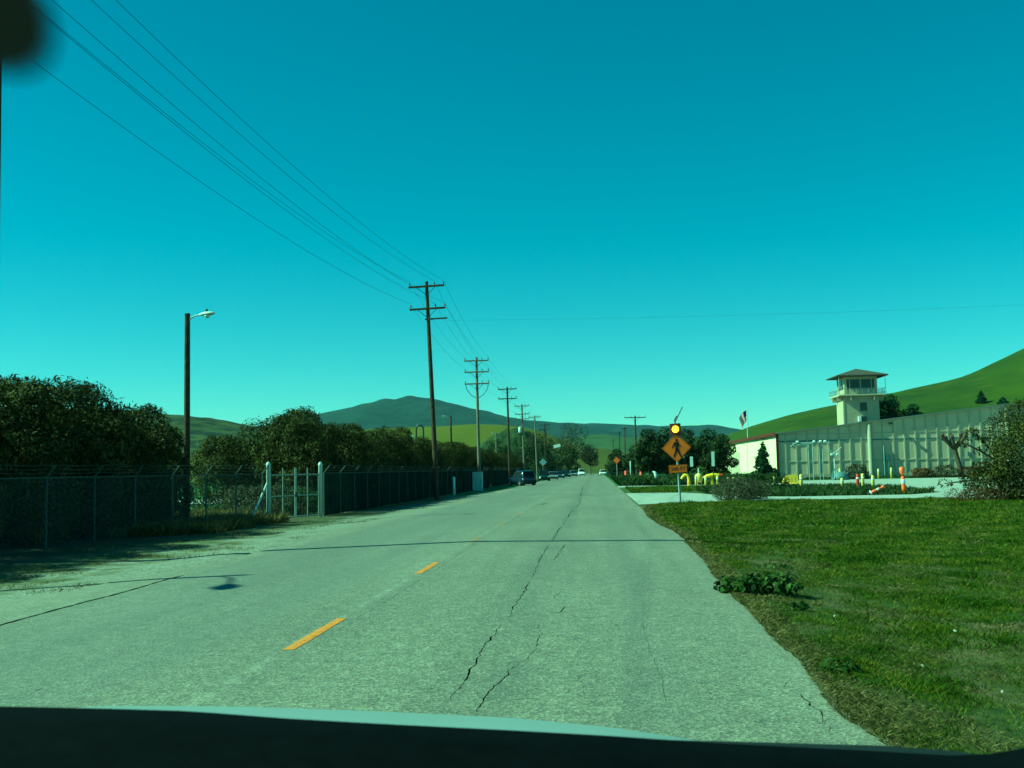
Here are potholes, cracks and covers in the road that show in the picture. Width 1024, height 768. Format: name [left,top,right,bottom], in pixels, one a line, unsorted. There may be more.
crack [785,678,831,732]
crack [441,485,584,712]
